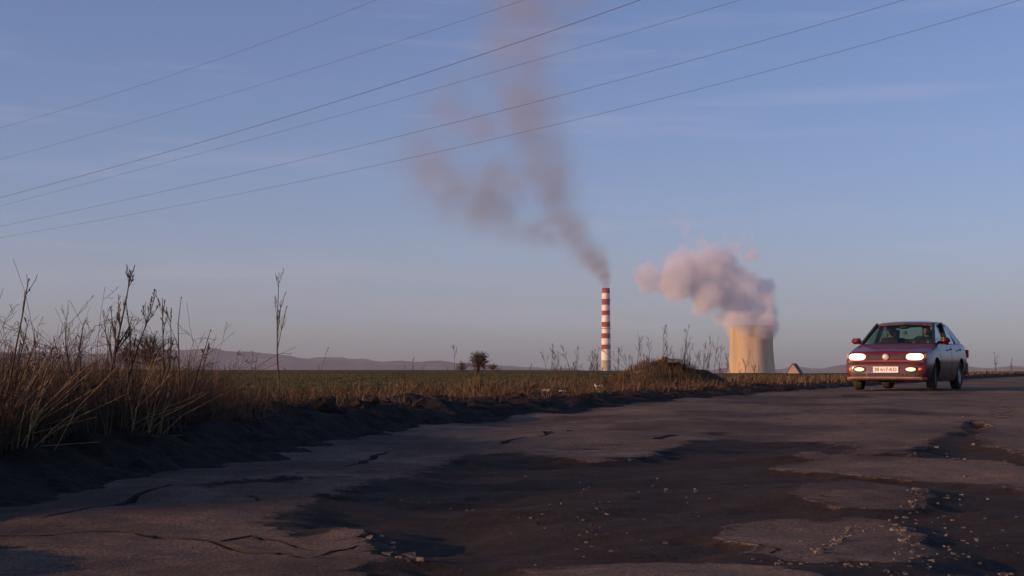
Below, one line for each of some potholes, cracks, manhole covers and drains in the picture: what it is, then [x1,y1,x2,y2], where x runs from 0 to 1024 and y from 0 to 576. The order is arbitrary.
pothole [900,419,1024,466]
crack [338,452,390,477]
crack [490,429,601,450]
crack [0,484,360,559]
pothole [257,438,1024,576]
